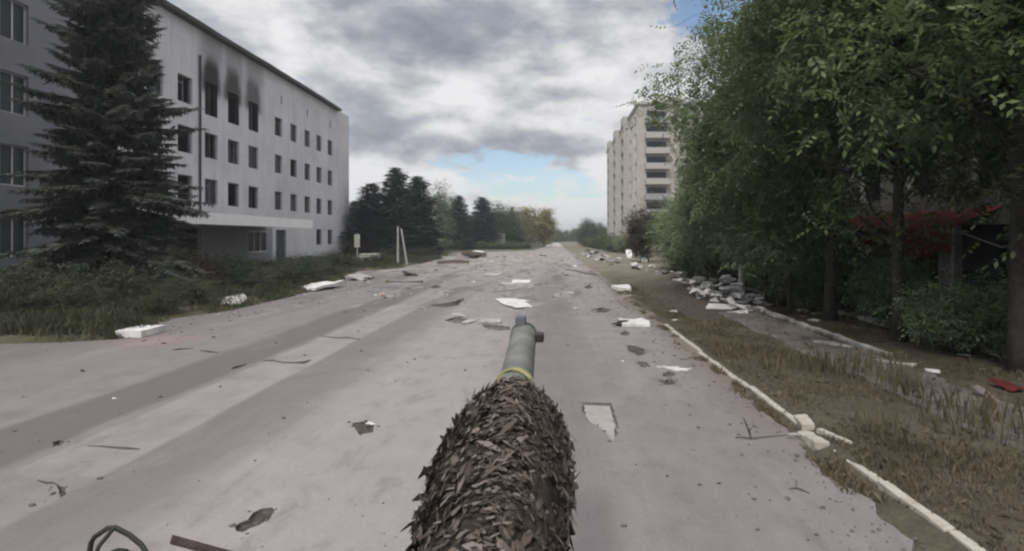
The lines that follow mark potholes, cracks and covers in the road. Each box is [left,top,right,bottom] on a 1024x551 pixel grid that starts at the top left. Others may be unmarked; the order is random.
pothole [625,345,648,356]
crack [173,348,310,369]
pothole [347,420,380,435]
pothole [578,402,619,442]
